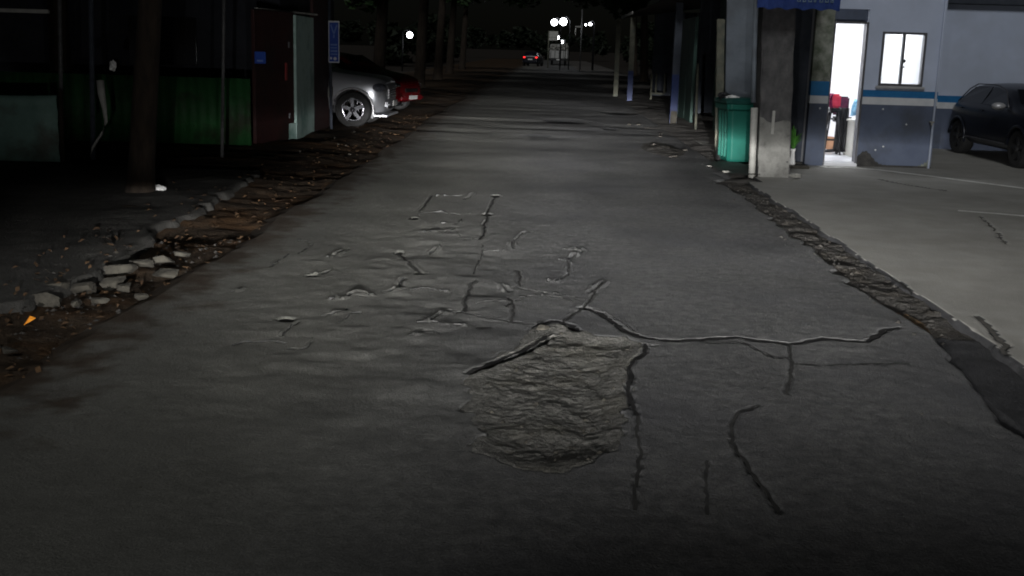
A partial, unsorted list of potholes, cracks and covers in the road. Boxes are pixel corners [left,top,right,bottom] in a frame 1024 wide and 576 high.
crack [975,317,1010,355]
crack [382,195,913,515]
pothole [459,324,642,473]
